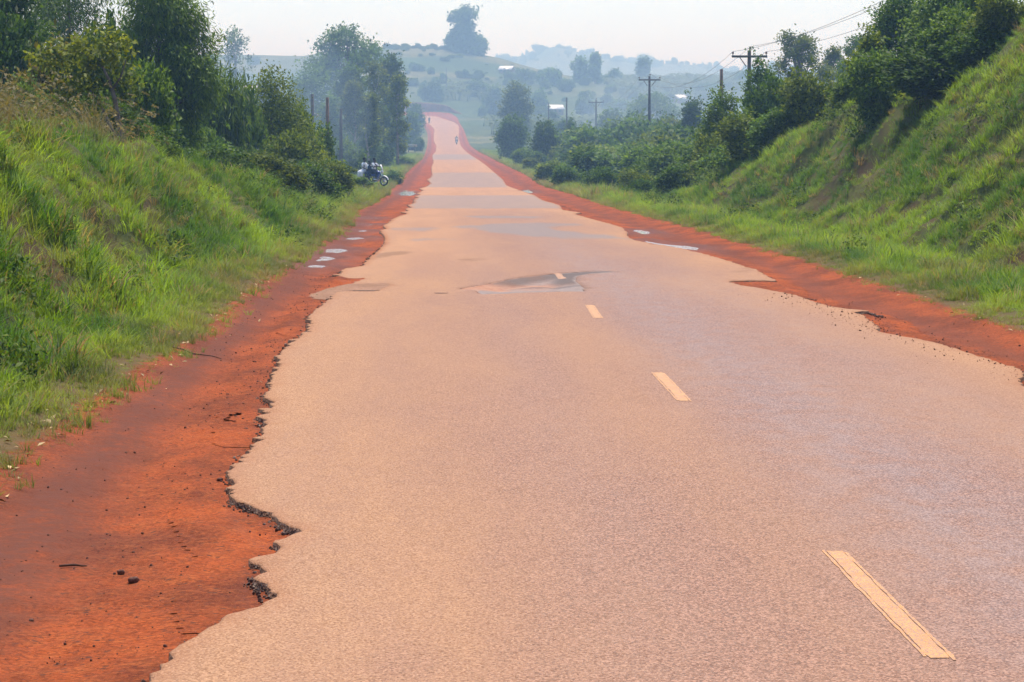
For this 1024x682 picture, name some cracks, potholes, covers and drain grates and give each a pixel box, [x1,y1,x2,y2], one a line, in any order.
pothole [462,271,610,294]
